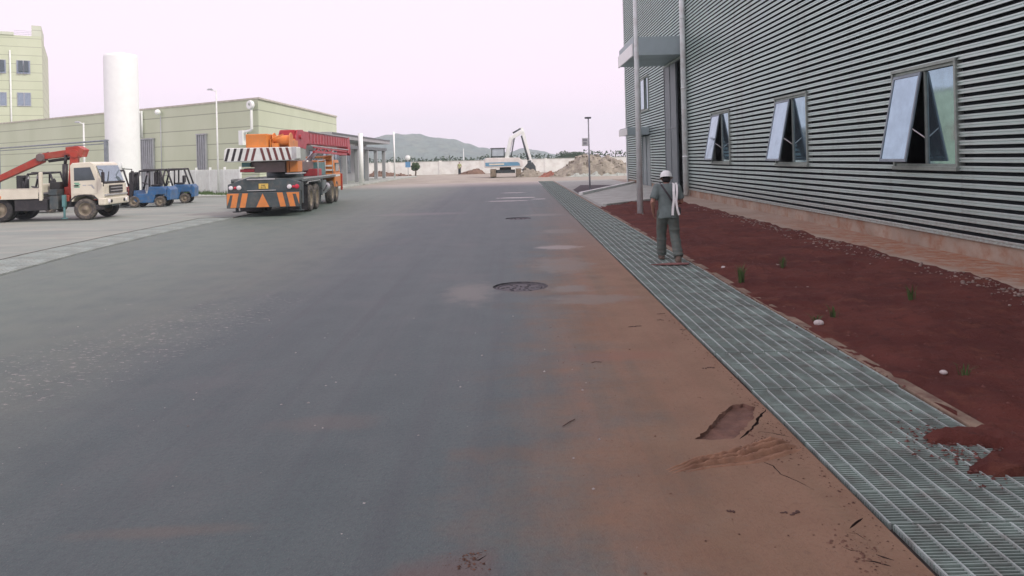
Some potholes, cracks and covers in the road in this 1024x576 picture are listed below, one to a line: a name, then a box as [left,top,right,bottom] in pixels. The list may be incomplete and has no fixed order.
drain grate [618,258,695,269]
crack [741,410,788,438]
drain grate [610,250,674,260]
drain grate [603,244,668,253]
drain grate [752,387,966,446]
drain grate [638,277,735,293]
drain grate [715,350,899,392]
manhole cover [493,282,548,292]
pothole [696,404,755,440]
drain grate [667,304,794,328]
crack [844,518,892,566]
drain grate [805,439,1024,530]
